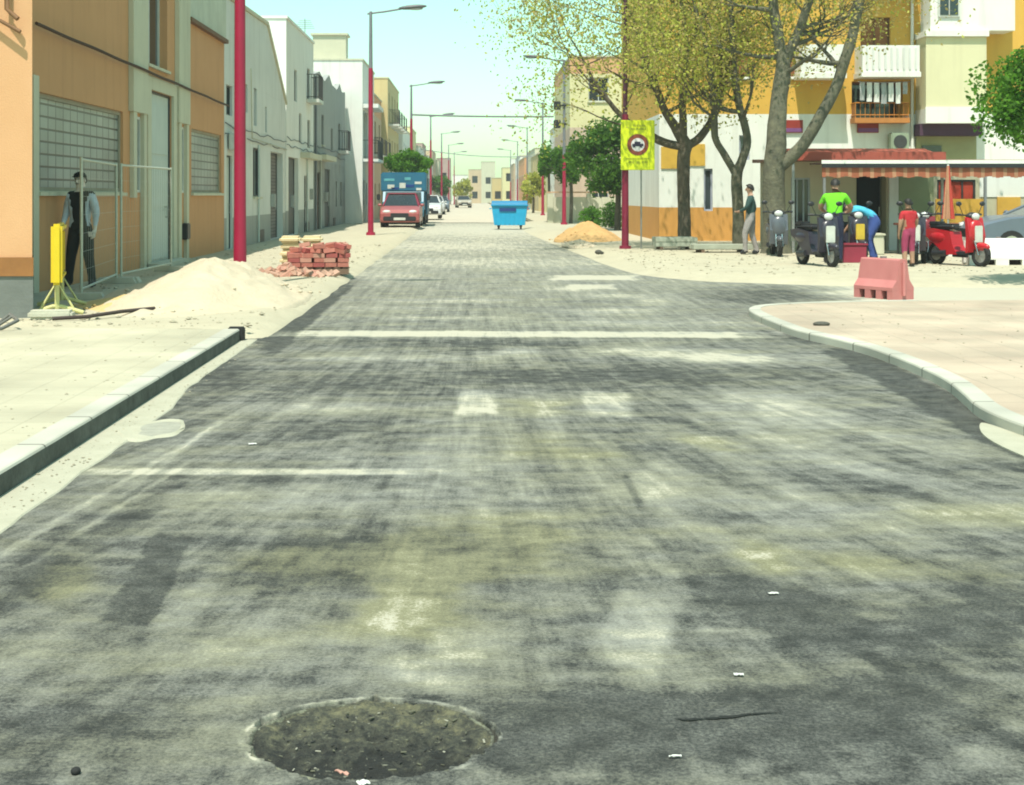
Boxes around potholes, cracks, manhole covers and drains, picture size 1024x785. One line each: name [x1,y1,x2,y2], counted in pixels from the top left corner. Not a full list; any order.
crack [677,712,779,720]
